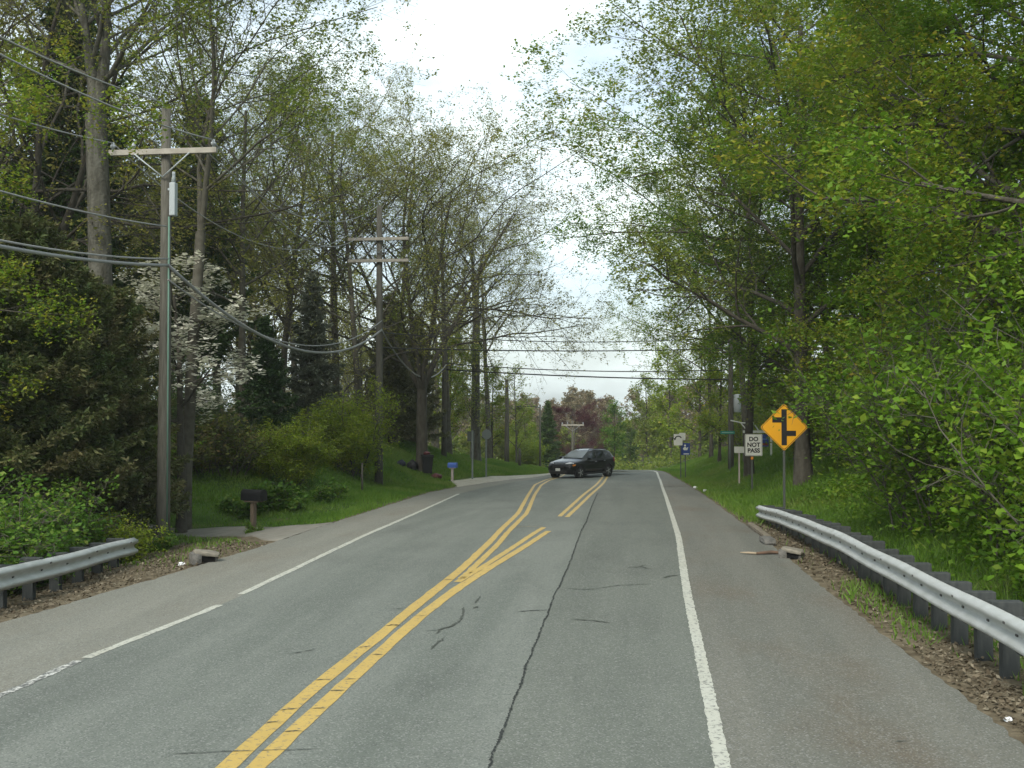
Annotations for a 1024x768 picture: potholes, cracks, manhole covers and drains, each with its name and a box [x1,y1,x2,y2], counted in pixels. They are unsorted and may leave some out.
crack [488,494,646,768]
crack [390,596,481,649]
